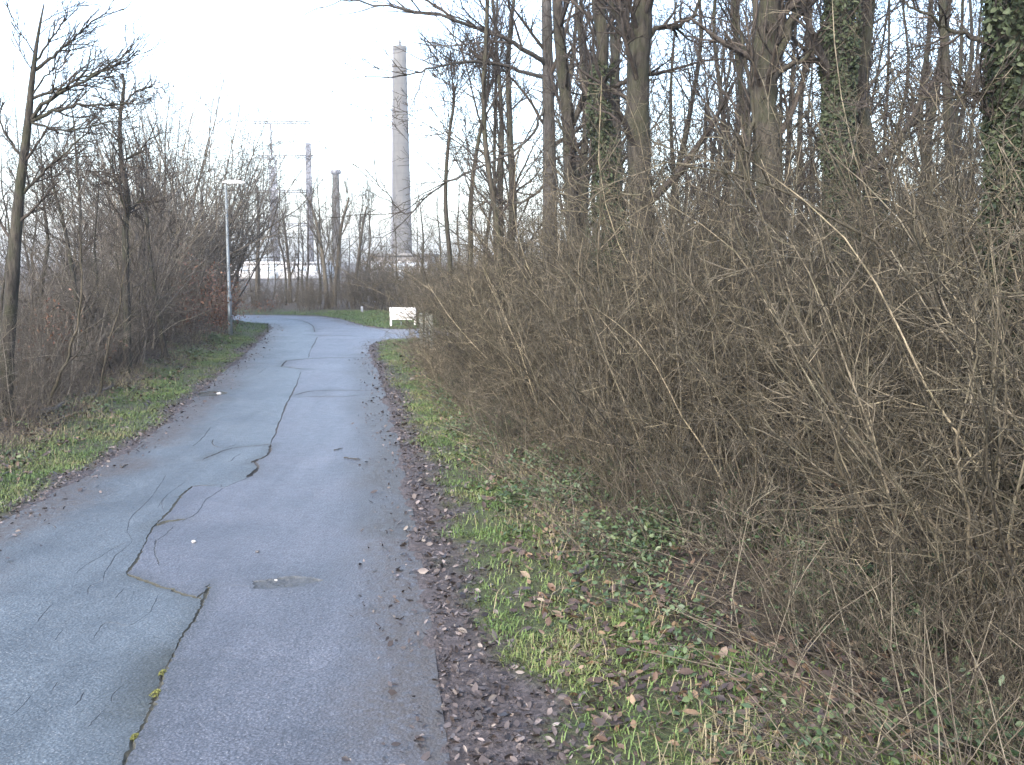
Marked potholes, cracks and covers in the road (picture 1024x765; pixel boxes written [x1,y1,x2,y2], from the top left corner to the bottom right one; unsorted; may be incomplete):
crack [93,596,158,640]
crack [78,319,328,598]
crack [75,687,120,727]
